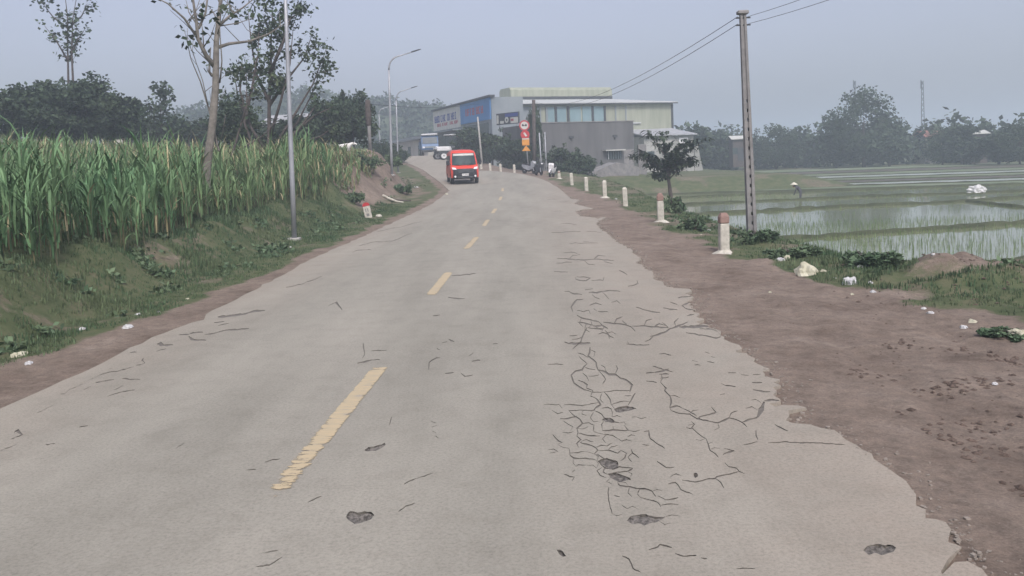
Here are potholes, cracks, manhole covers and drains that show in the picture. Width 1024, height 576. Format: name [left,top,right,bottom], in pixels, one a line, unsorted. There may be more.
pothole [864,544,895,555]
pothole [628,514,663,525]
pothole [598,459,618,470]
crack [74,310,265,397]
crack [544,223,844,525]
pothole [347,511,373,524]
pothole [609,473,631,482]
